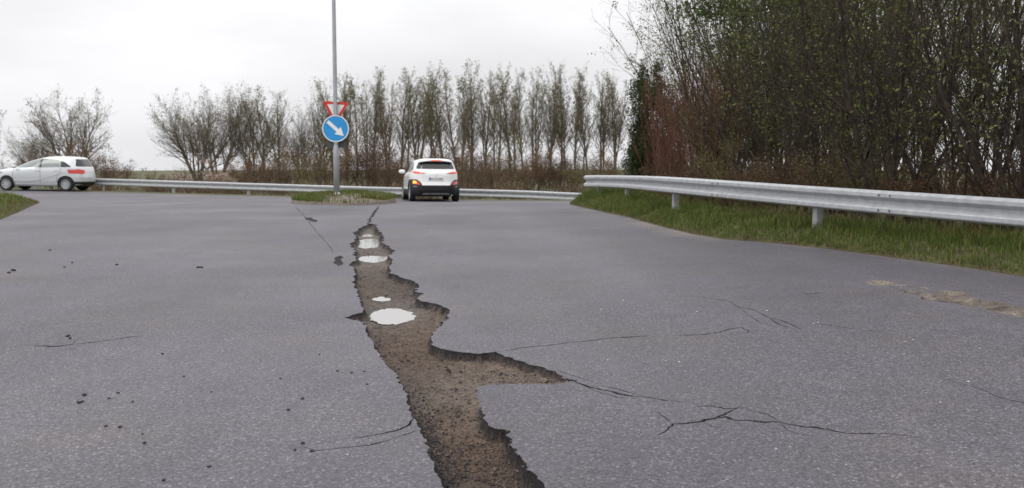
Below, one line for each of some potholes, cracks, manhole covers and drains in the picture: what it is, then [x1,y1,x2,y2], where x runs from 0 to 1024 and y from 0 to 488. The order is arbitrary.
crack [679,295,802,336]
pothole [345,224,578,488]
crack [45,335,146,347]
crack [500,336,640,352]
crack [299,419,418,453]
crack [560,371,946,443]
